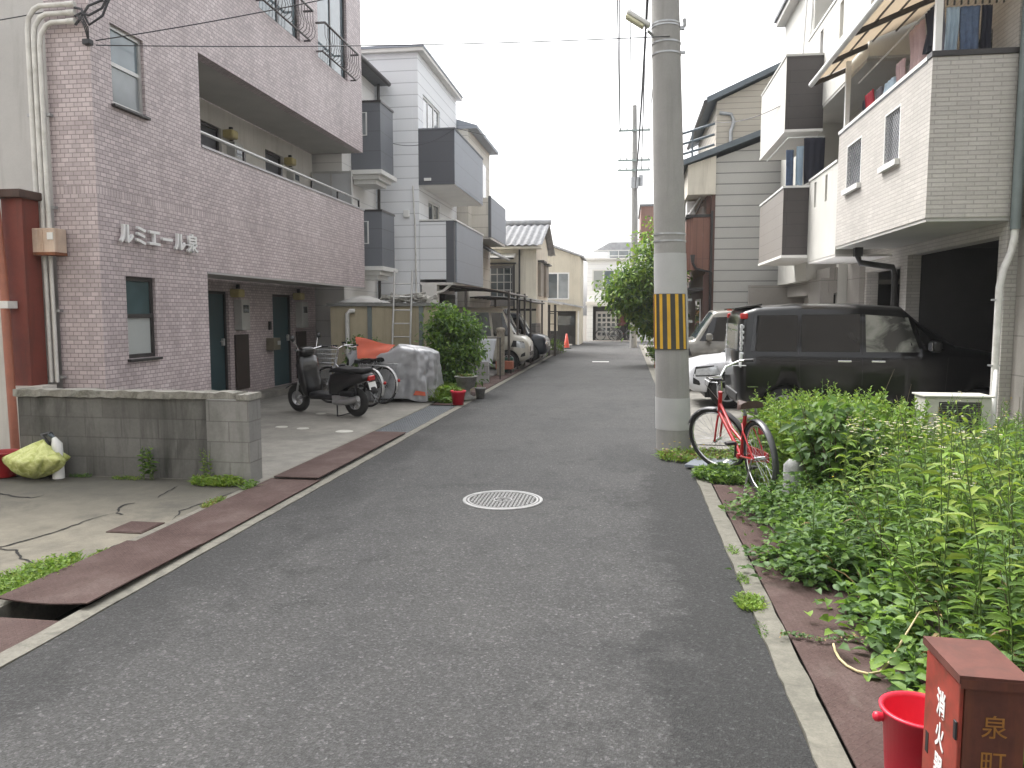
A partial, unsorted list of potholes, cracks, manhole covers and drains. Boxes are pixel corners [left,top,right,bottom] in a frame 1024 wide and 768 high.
crack [158,486,232,520]
utility cover [106,521,165,534]
crack [0,503,132,563]
manhole cover [463,490,543,510]
drain grate [377,406,455,435]
